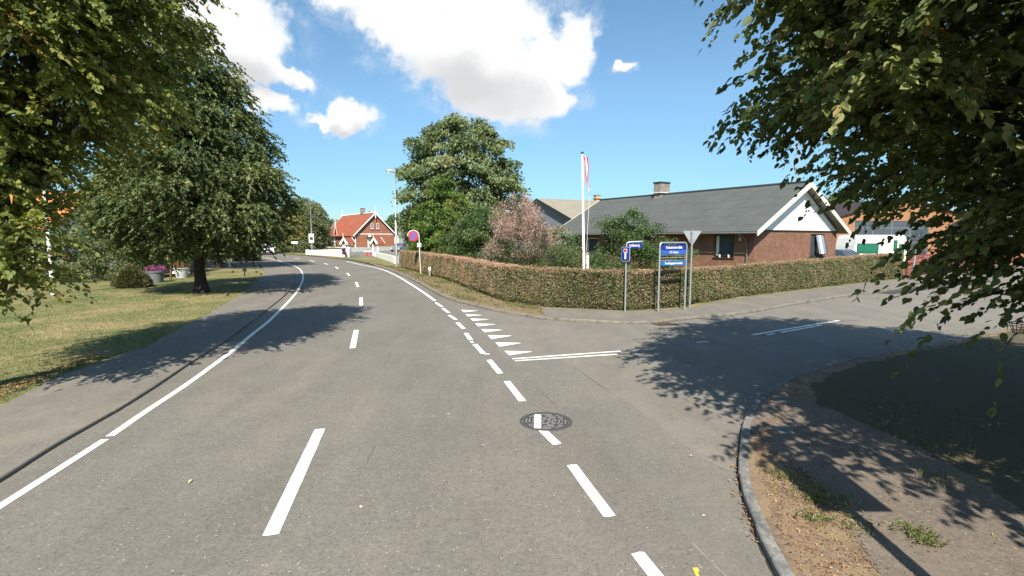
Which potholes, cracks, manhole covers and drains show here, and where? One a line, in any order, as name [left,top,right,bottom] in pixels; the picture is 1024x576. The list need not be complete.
manhole cover [520,412,572,431]
